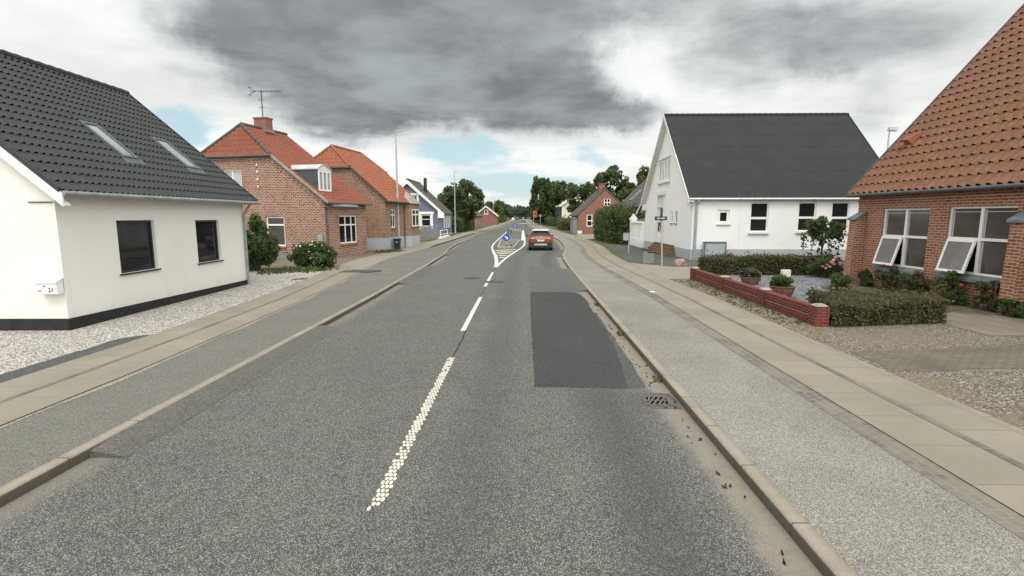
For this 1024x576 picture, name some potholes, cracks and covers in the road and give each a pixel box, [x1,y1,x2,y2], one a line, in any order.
drain grate [626,393,682,409]
